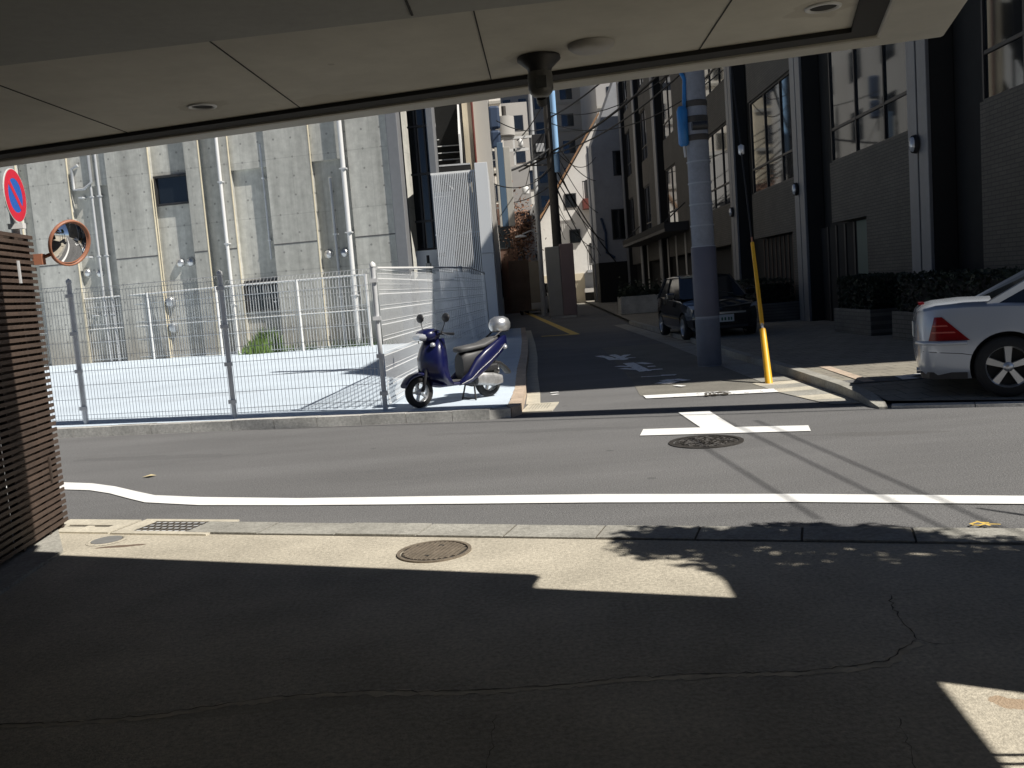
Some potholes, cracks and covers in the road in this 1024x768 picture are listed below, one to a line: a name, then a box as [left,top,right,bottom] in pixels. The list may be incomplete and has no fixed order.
manhole cover [397,540,472,563]
drain grate [110,519,239,536]
manhole cover [668,435,744,449]
manhole cover [85,535,128,546]
crack [0,595,950,768]
